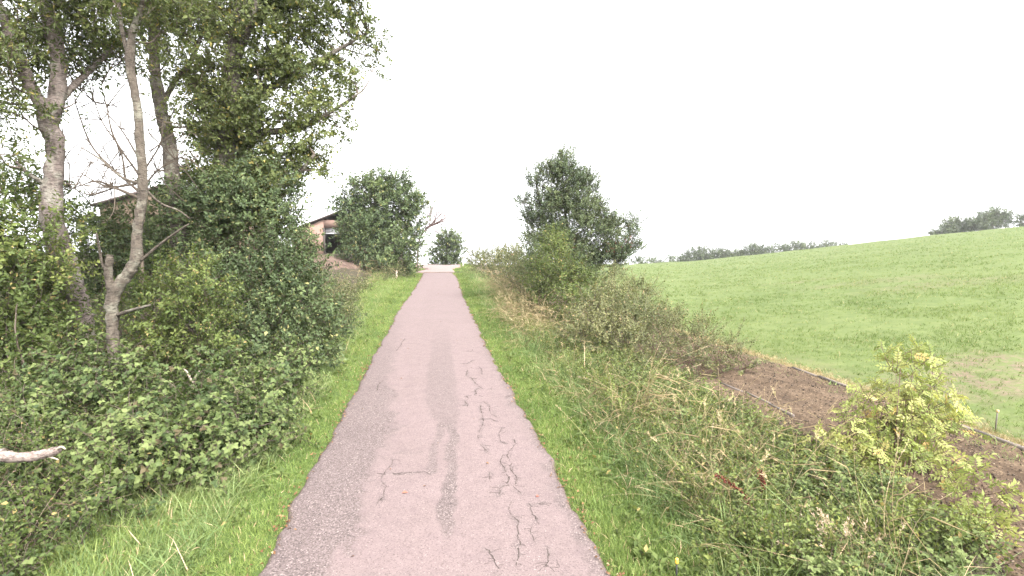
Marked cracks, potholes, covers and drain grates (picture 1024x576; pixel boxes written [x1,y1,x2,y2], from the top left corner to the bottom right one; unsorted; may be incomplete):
crack [463,360,560,572]
